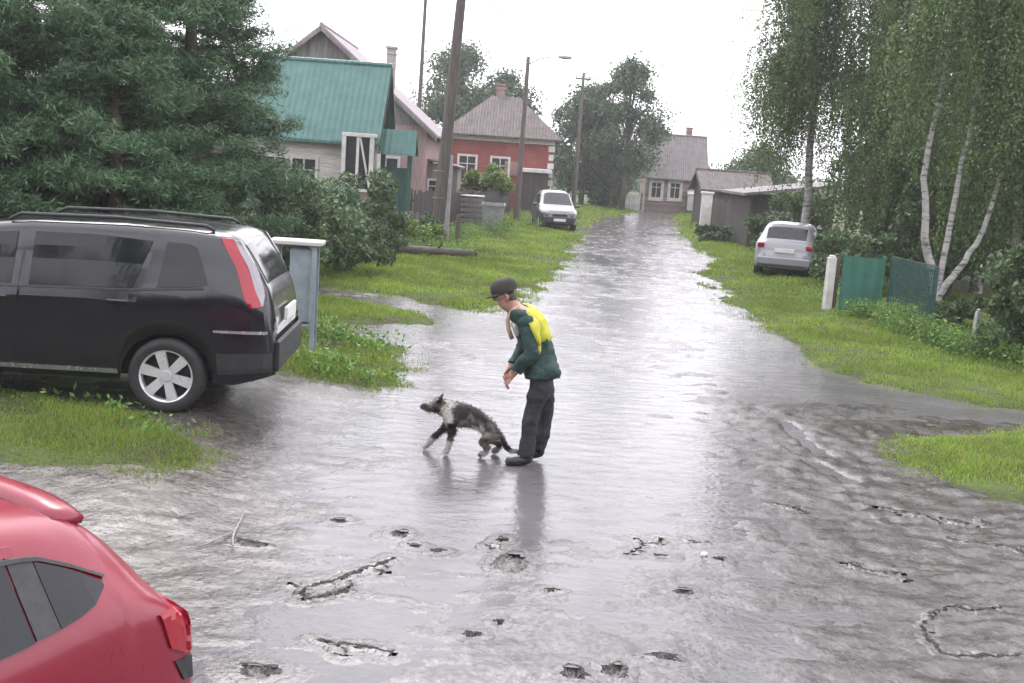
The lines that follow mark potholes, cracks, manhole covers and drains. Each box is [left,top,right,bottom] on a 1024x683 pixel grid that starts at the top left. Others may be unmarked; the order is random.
pothole [398,541,432,552]
pothole [222,536,286,552]
crack [764,502,807,513]
pothole [481,547,539,579]
pothole [380,526,419,542]
pothole [546,659,603,683]
pothole [584,655,641,683]
crack [912,603,1024,662]
pothole [421,546,457,557]
pothole [224,658,295,683]
crack [847,562,912,583]
crack [306,637,394,657]
